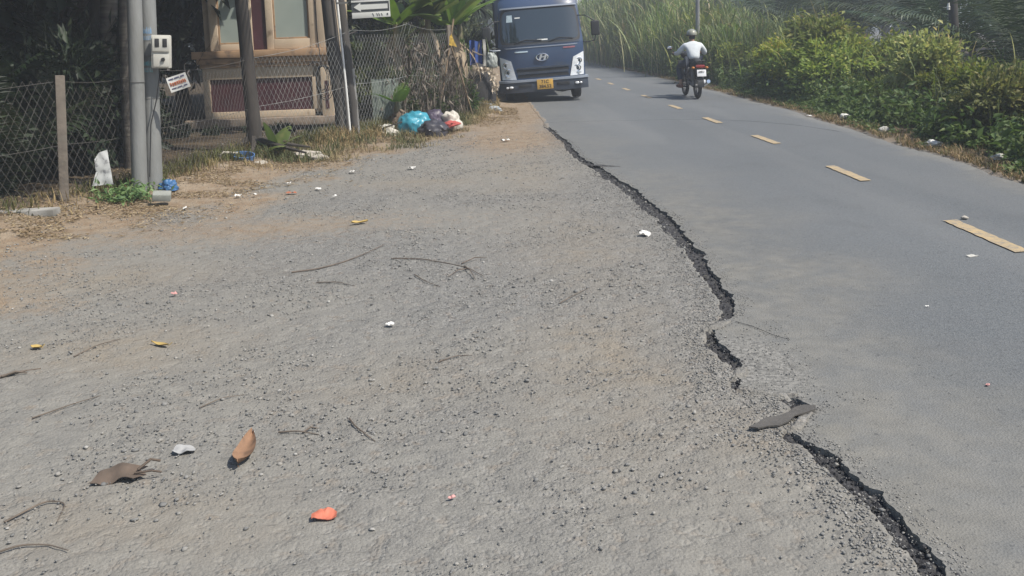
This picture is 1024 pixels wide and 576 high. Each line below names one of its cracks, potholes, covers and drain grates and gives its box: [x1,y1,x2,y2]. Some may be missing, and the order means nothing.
crack [775,431,960,576]
crack [544,127,790,390]
crack [776,396,818,409]
